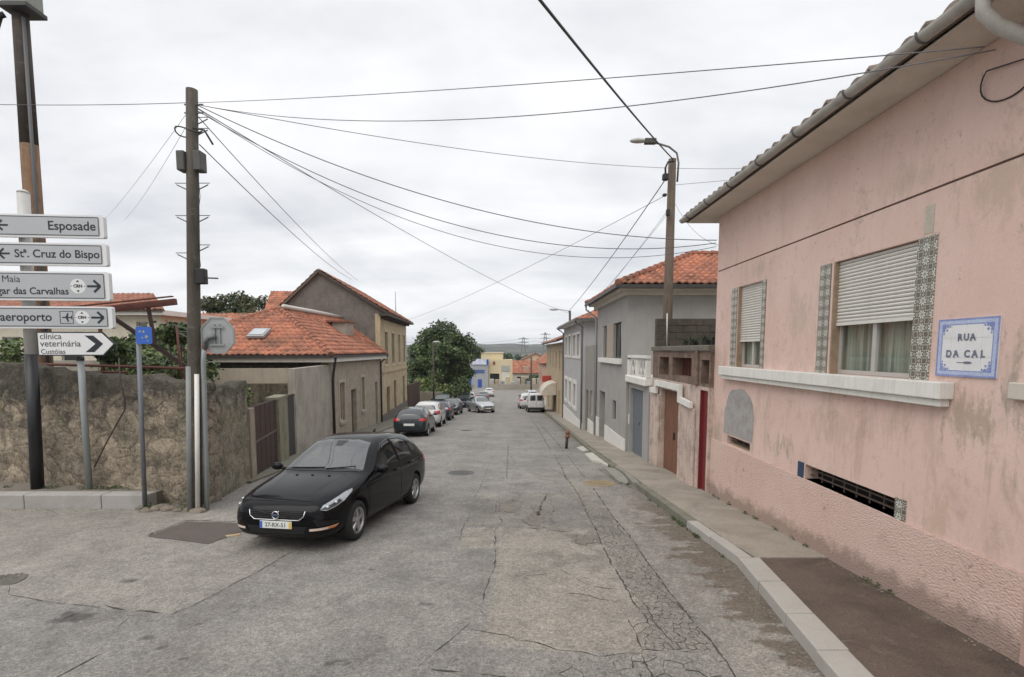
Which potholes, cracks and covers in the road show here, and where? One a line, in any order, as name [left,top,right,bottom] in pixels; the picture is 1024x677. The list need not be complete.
crack [471,508,722,677]
crack [521,471,566,532]
